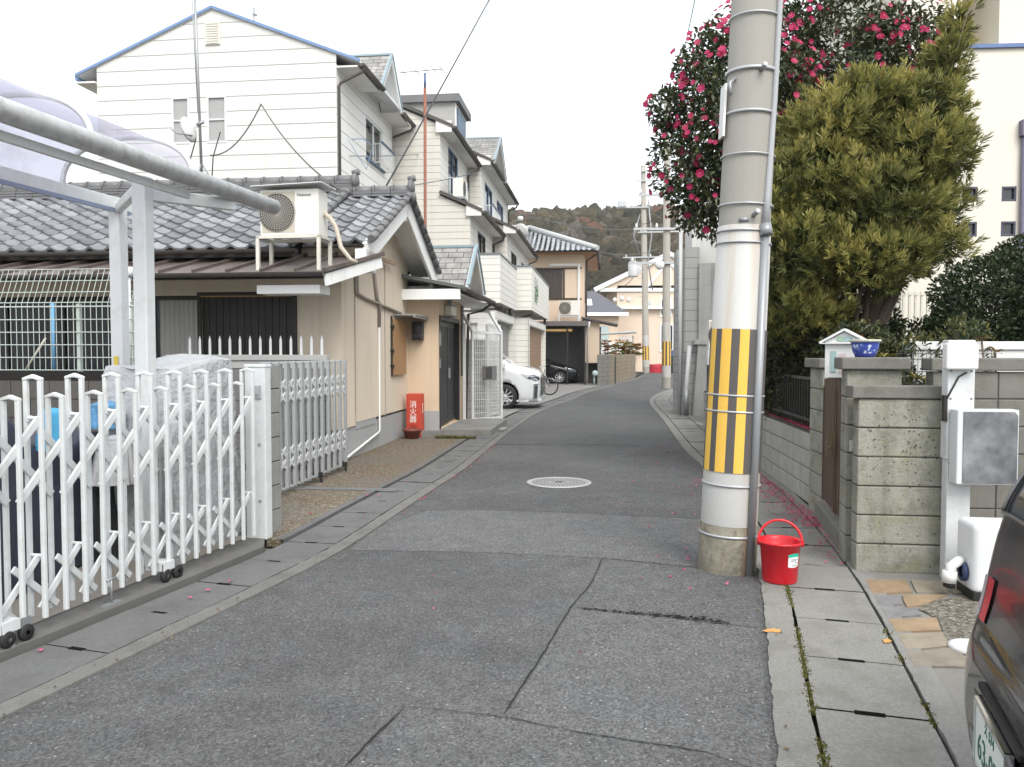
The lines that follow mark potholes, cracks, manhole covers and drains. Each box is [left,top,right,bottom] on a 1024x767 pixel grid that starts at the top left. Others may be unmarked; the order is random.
crack [345,558,729,767]
manhole cover [527,477,592,488]
